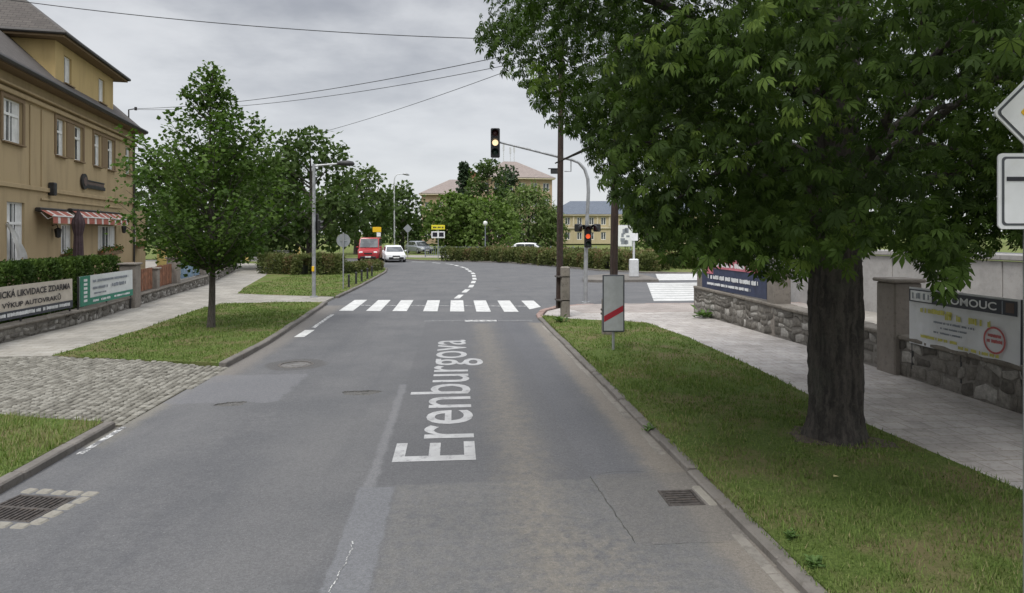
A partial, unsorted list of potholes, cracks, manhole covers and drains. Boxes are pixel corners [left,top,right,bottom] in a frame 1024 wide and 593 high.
drain grate [658,486,717,506]
drain grate [0,488,100,529]
crack [590,468,725,545]
